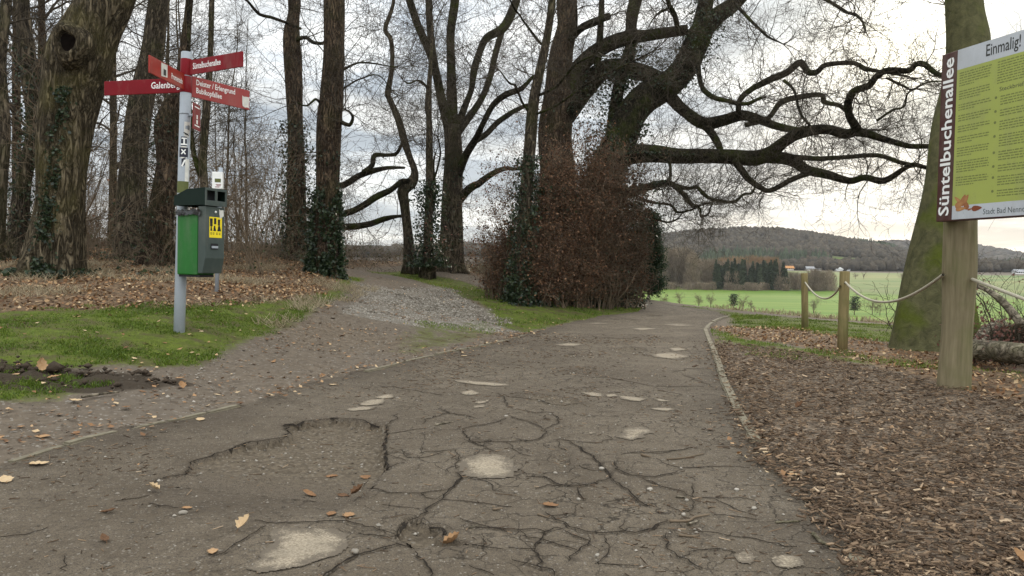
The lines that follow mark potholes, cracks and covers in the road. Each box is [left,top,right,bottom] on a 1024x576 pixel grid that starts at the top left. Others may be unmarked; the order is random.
pothole [158,418,389,508]
crack [117,386,797,576]
